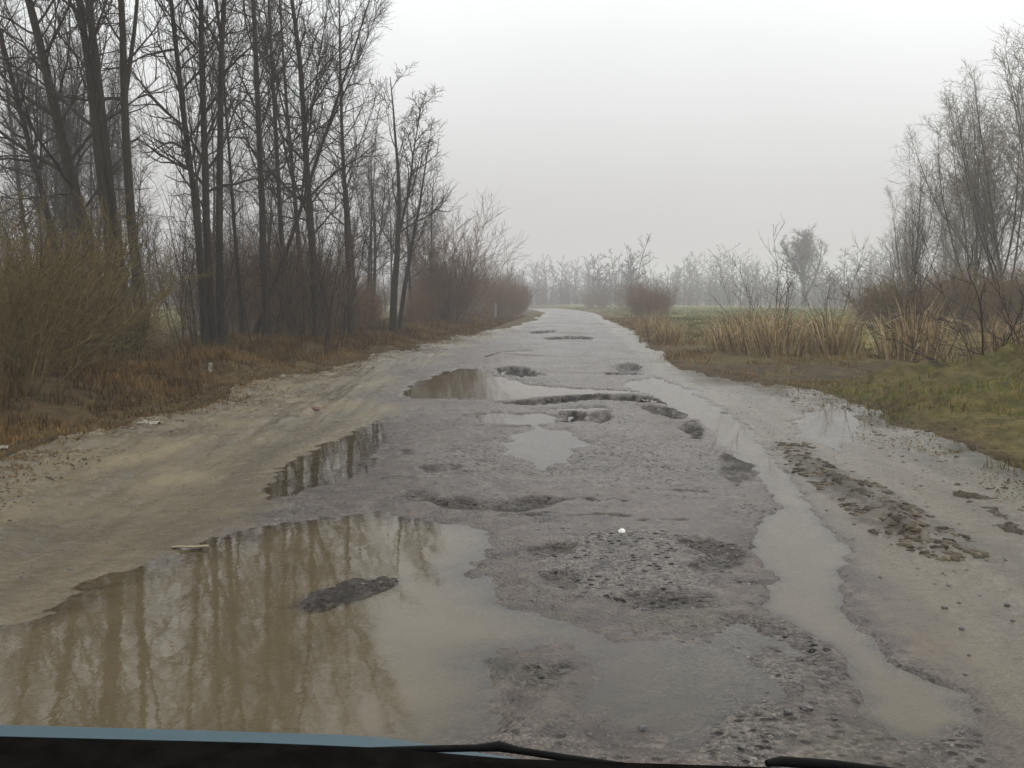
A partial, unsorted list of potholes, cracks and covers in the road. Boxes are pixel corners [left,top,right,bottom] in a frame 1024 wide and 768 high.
pothole [494,393,667,405]
pothole [610,361,644,372]
pothole [490,424,602,472]
pothole [0,501,797,759]
pothole [559,410,588,422]
pothole [386,365,644,400]
pothole [634,404,699,419]
pothole [433,494,560,512]
